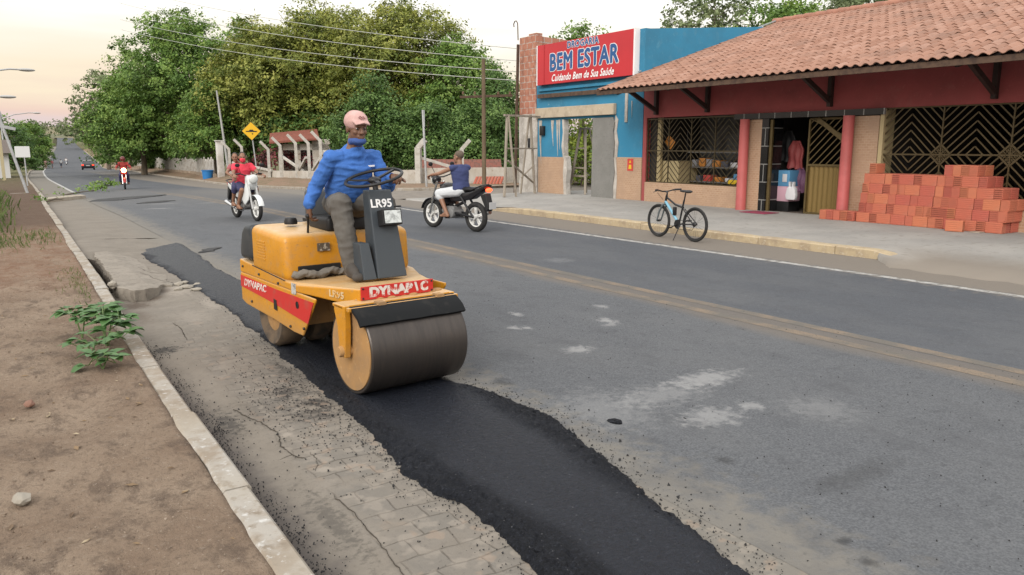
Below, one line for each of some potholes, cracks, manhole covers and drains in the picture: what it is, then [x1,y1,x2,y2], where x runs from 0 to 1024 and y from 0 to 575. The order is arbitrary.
crack [233,409,318,468]
pothole [88,258,113,293]
crack [334,495,404,575]
